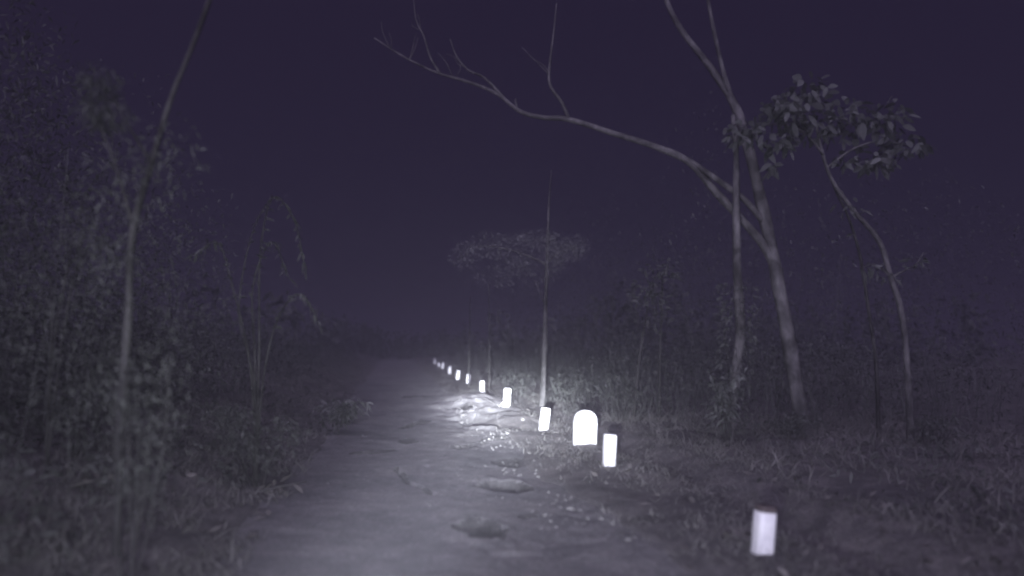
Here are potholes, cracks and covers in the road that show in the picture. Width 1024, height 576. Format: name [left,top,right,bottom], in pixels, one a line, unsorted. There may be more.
pothole [451,515,510,540]
pothole [491,458,521,468]
pothole [476,480,534,494]
